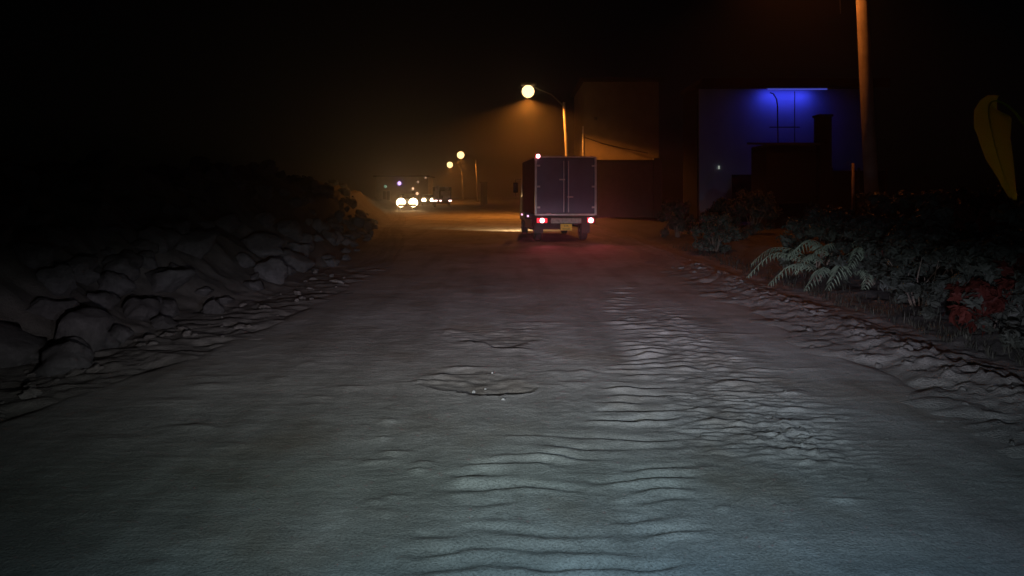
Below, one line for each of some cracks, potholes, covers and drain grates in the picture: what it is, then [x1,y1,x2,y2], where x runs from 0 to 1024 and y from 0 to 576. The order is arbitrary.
pothole [429,322,548,349]
pothole [412,367,540,396]
